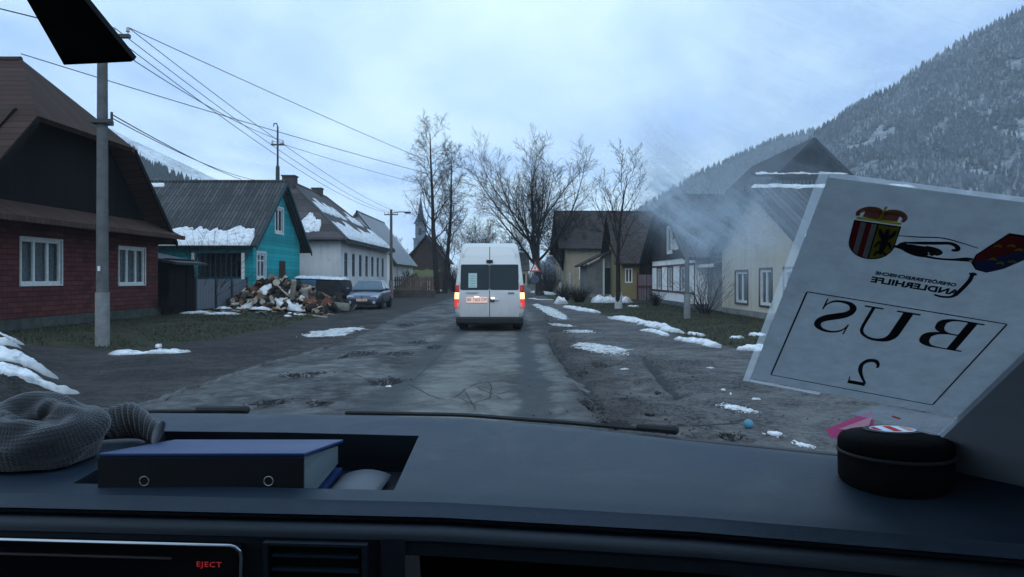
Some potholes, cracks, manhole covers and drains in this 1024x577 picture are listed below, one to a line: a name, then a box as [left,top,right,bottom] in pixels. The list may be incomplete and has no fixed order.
pothole [716,431,749,442]
crack [409,346,524,410]
pothole [306,399,334,408]
pothole [243,397,293,408]
pothole [367,376,411,387]
pothole [335,349,378,359]
